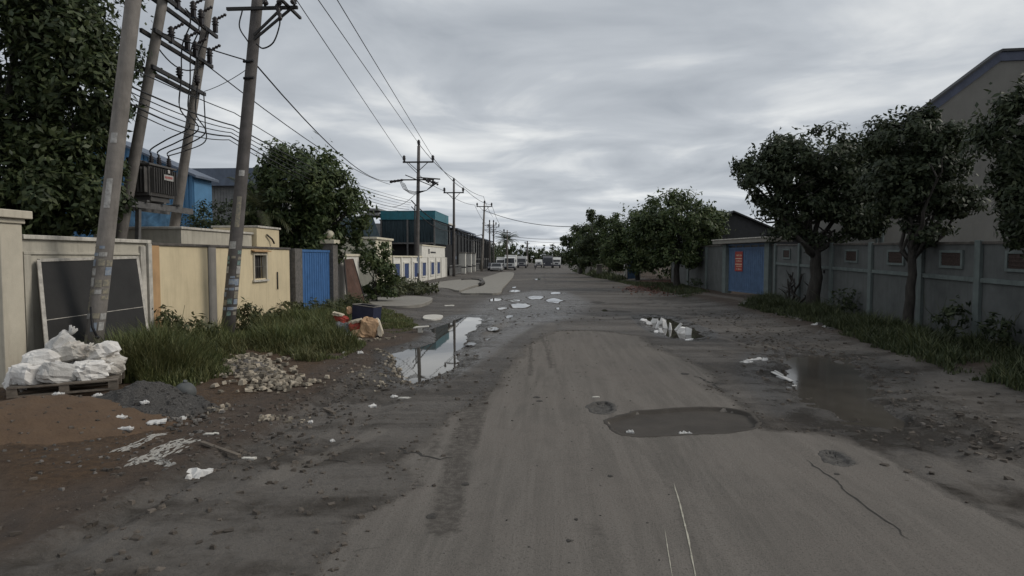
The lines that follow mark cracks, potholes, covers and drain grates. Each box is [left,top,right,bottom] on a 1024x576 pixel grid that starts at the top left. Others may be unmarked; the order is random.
crack [809,461,908,539]
crack [399,447,453,460]
pothole [585,401,617,415]
pothole [603,406,762,438]
pothole [818,450,856,467]
